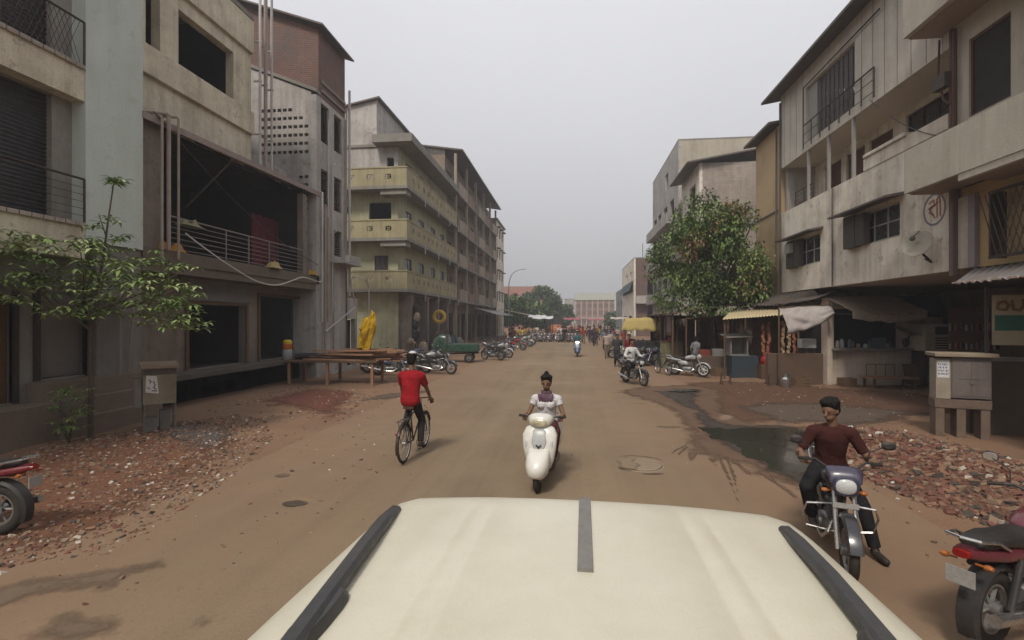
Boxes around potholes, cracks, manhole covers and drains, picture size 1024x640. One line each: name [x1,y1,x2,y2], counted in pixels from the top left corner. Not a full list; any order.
manhole cover [618,458,665,473]
